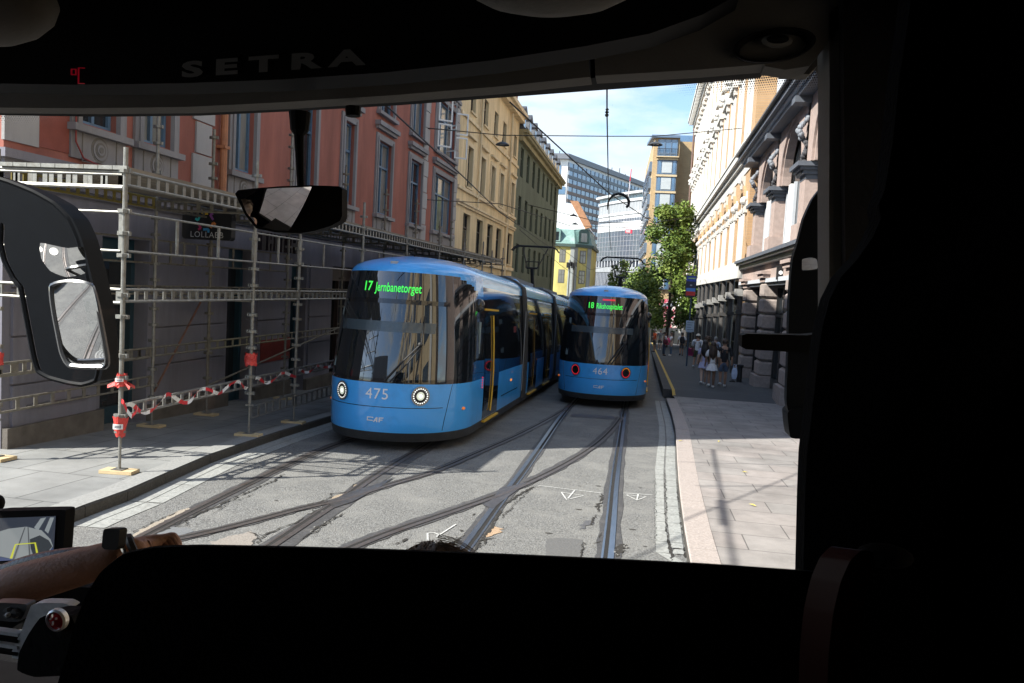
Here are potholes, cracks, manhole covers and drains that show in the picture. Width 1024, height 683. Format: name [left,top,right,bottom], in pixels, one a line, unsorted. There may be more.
crack [248,480,367,544]
